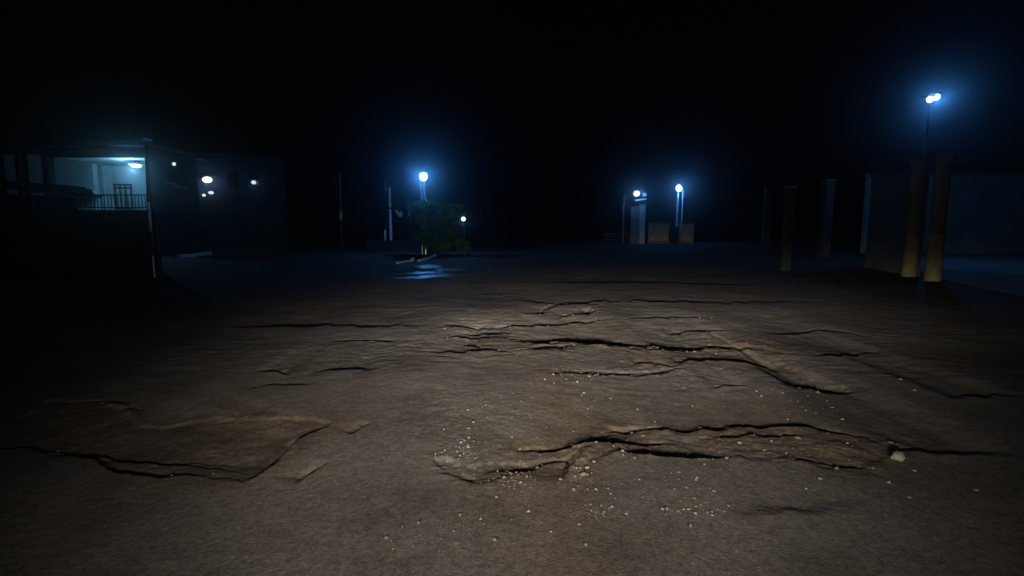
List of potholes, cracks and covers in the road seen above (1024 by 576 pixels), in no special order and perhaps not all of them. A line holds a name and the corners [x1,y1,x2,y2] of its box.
crack [423,302,732,355]
pothole [431,456,574,486]
crack [294,461,330,483]
crack [762,329,887,356]
